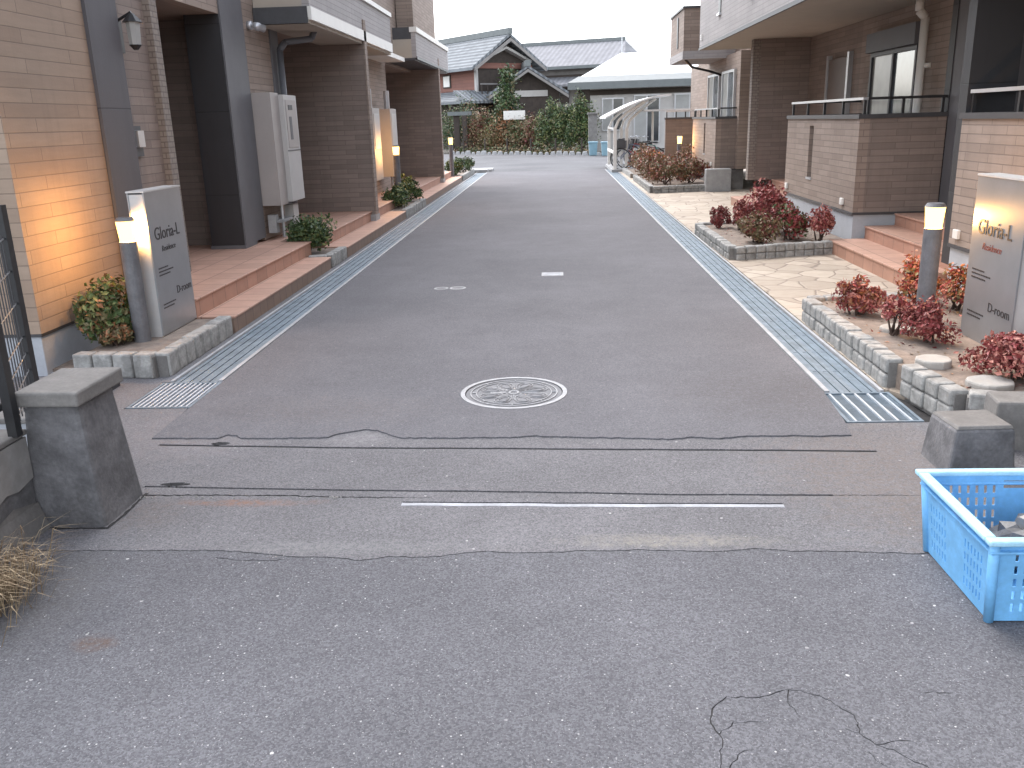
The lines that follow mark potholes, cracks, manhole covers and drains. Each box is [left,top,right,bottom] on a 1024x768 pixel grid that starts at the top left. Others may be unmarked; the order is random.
crack [710,690,929,768]
drain grate [825,392,924,423]
drain grate [126,382,222,409]
manhole cover [461,377,567,409]
